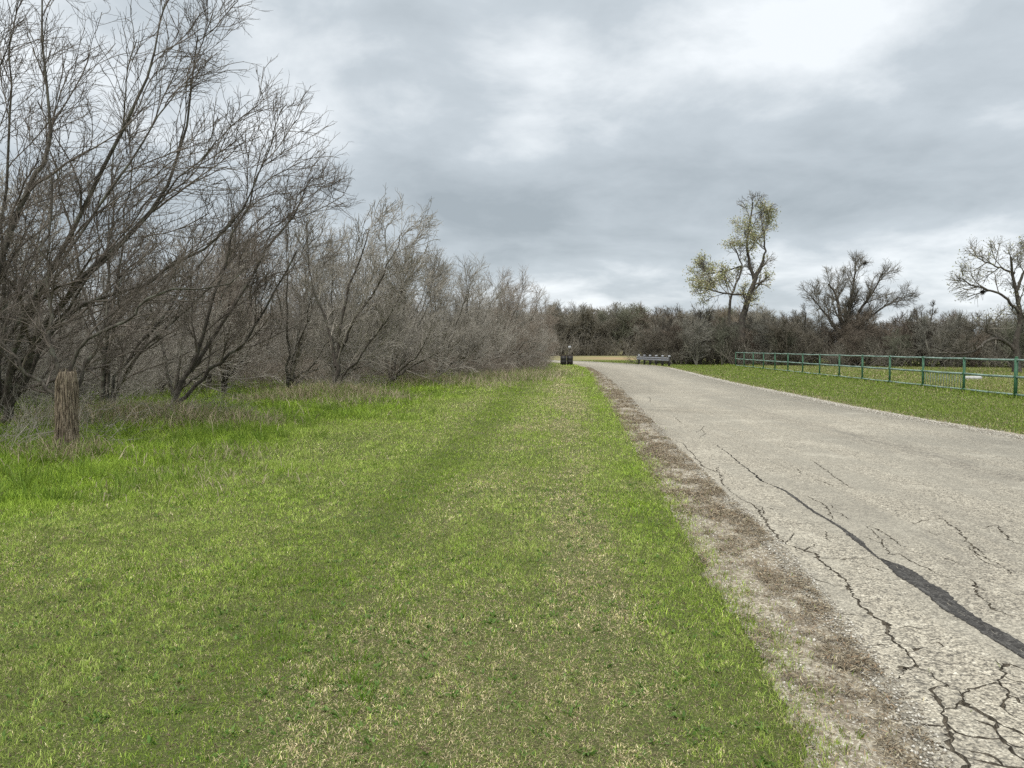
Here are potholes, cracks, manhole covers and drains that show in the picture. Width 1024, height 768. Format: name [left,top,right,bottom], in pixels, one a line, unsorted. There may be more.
crack [676,419,1024,768]
